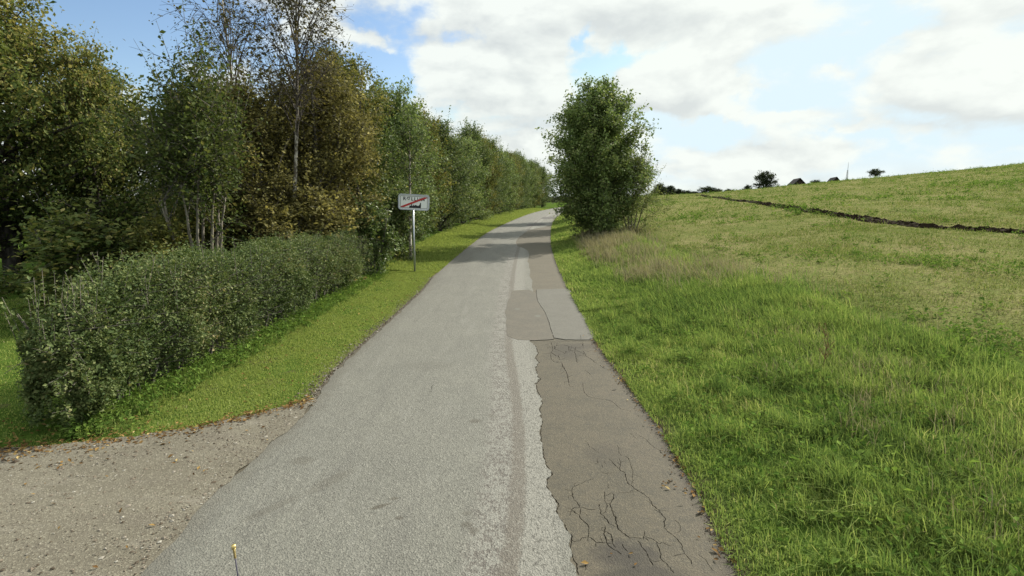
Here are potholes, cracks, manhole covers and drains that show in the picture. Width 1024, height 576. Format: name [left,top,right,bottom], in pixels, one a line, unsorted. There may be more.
crack [533,344,692,575]
